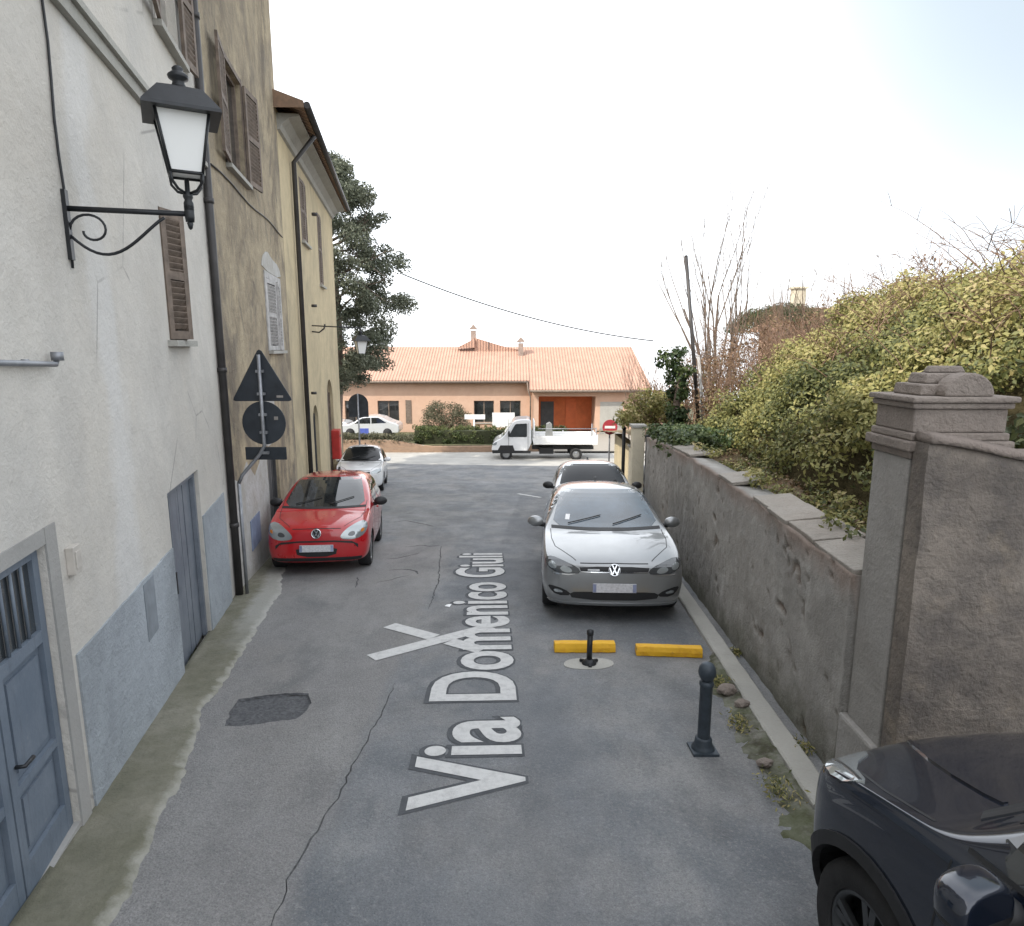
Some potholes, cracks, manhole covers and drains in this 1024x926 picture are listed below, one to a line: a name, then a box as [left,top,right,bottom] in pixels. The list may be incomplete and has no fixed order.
crack [380,545,438,582]
